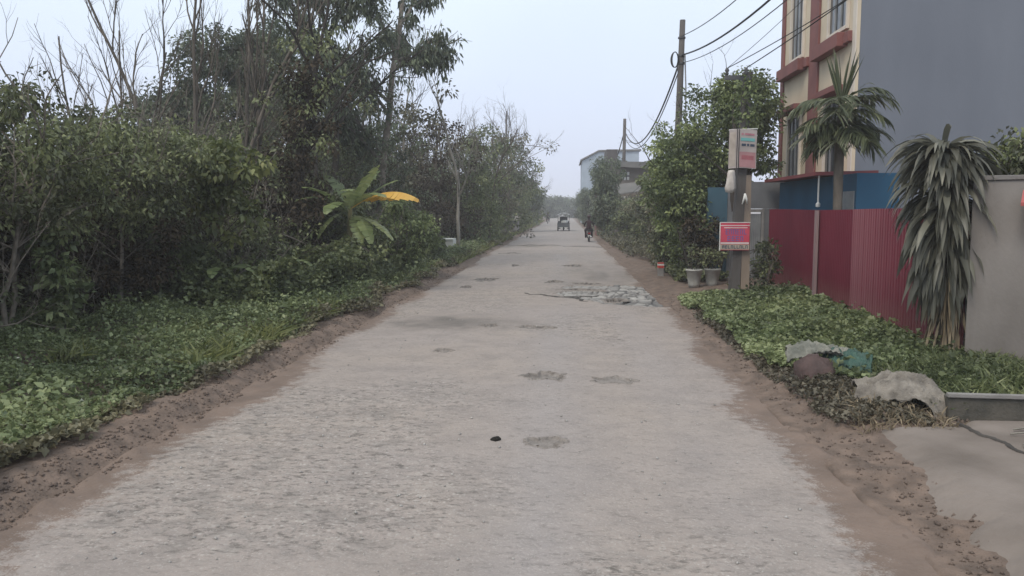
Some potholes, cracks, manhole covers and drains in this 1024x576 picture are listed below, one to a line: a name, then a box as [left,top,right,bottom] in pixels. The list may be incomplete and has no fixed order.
pothole [590,375,640,385]
pothole [523,436,570,449]
pothole [517,370,567,382]
